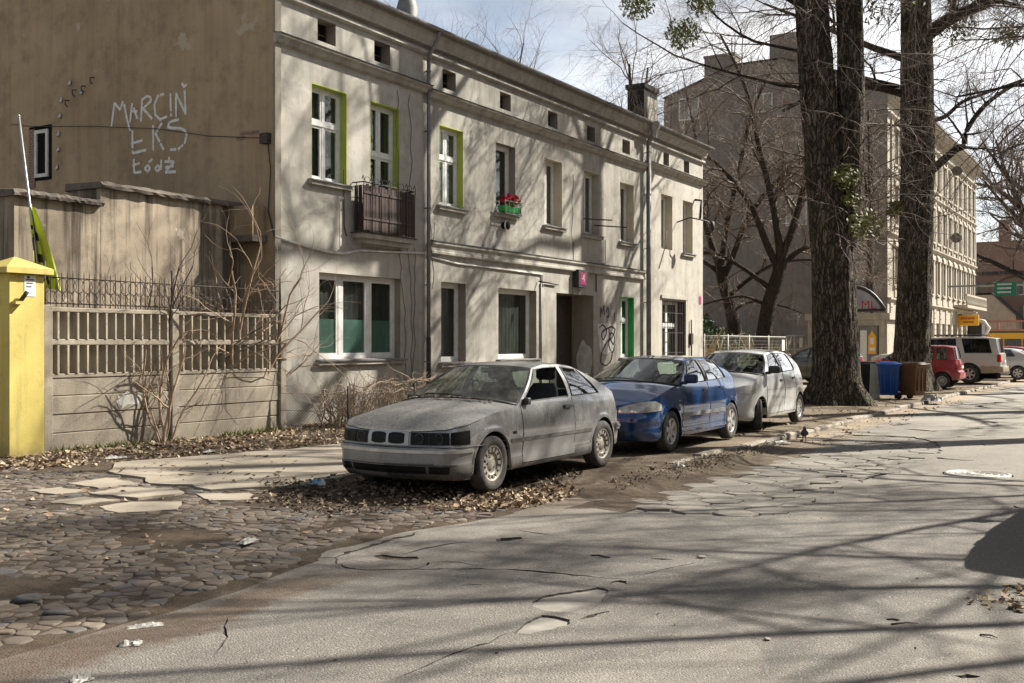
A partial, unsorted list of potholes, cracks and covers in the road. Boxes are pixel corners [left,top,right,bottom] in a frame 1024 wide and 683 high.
pothole [514,615,570,634]
manhole cover [944,470,1012,479]
crack [212,618,228,657]
crack [322,531,620,579]
crack [396,633,507,679]
pothole [532,587,608,613]
